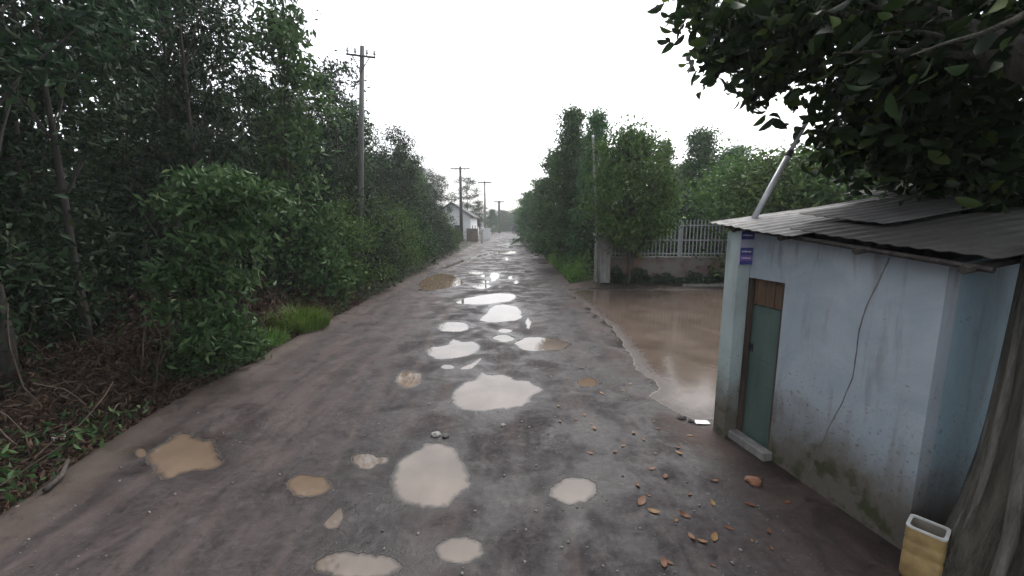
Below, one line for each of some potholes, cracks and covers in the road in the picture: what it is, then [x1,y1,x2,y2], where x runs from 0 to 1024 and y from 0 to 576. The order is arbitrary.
pothole [513,337,573,351]
pothole [285,473,333,498]
pothole [437,322,470,332]
pothole [479,304,523,322]
pothole [576,377,600,387]
pothole [389,442,474,510]
pothole [548,476,598,506]
pothole [456,293,516,305]
pothole [425,339,481,360]
pothole [433,535,486,565]
pothole [394,370,422,389]
pothole [311,549,405,576]
